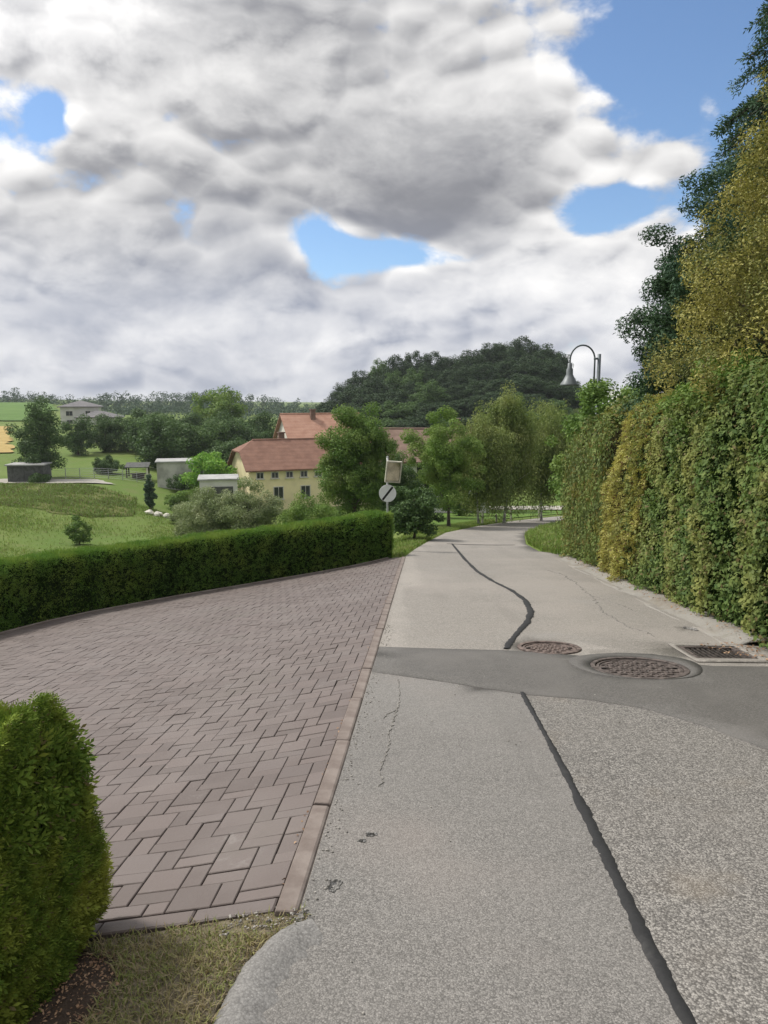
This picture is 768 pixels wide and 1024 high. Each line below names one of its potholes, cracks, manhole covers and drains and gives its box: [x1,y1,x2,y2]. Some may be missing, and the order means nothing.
crack [547,570,653,636]
manhole cover [590,657,690,679]
pothole [327,879,343,892]
manhole cover [517,641,581,655]
crack [378,680,400,786]
